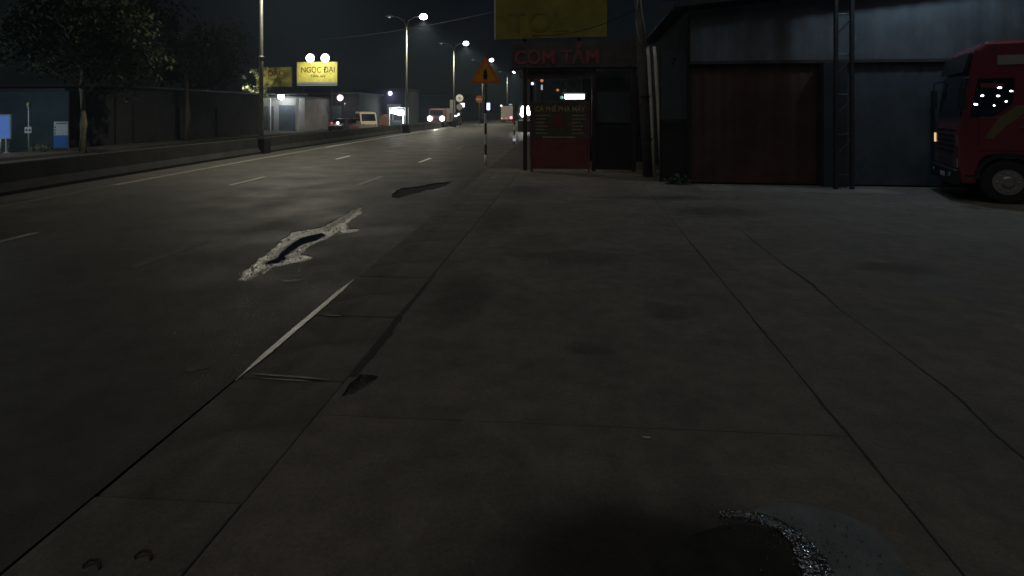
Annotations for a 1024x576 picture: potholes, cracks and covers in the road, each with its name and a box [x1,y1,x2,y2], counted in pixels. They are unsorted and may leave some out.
pothole [342,374,378,396]
pothole [237,206,362,281]
pothole [392,182,450,198]
